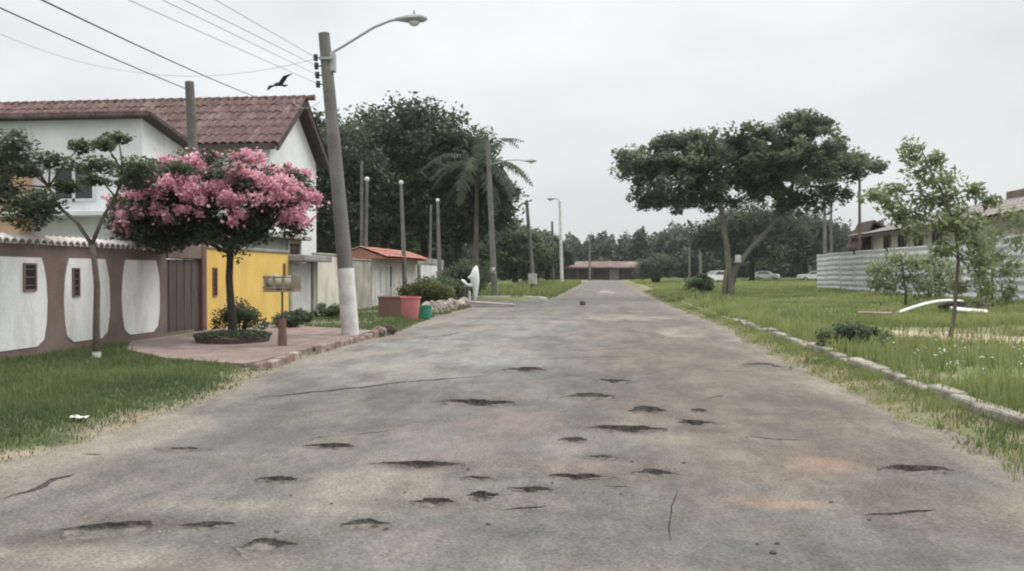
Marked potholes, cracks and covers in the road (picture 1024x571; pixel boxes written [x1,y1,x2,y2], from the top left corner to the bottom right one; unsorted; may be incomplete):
pothole [367,460,467,469]
pothole [54,520,152,540]
pothole [627,406,669,414]
pothole [876,464,952,476]
pothole [339,518,390,530]
pothole [171,521,236,530]
pothole [254,476,297,484]
pothole [439,398,518,407]
pothole [631,468,680,477]
pothole [560,392,615,401]
pothole [466,491,499,502]
pothole [585,425,669,434]
